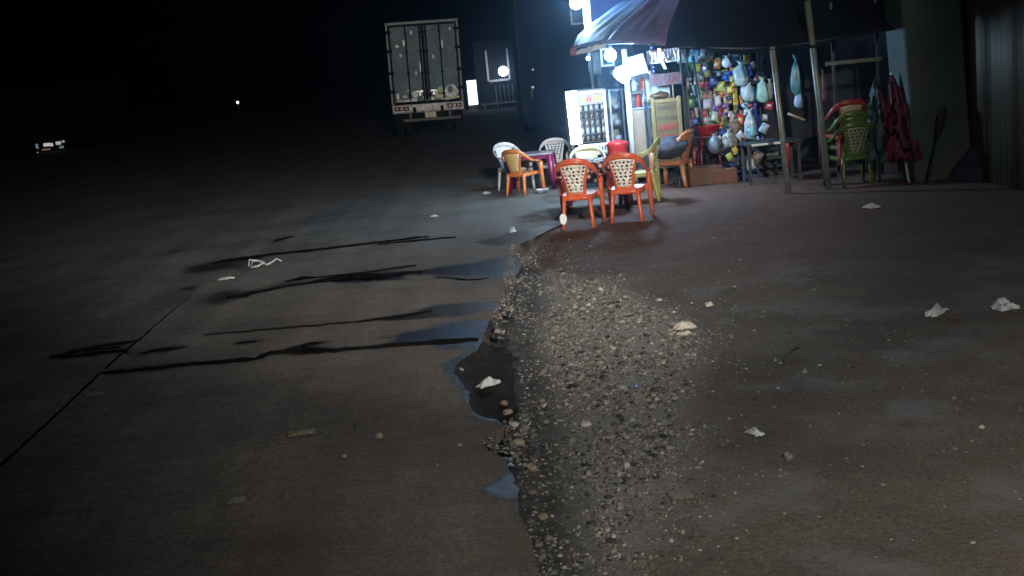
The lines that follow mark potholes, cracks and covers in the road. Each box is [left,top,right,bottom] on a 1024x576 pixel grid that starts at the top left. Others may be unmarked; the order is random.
pothole [454,342,519,430]
